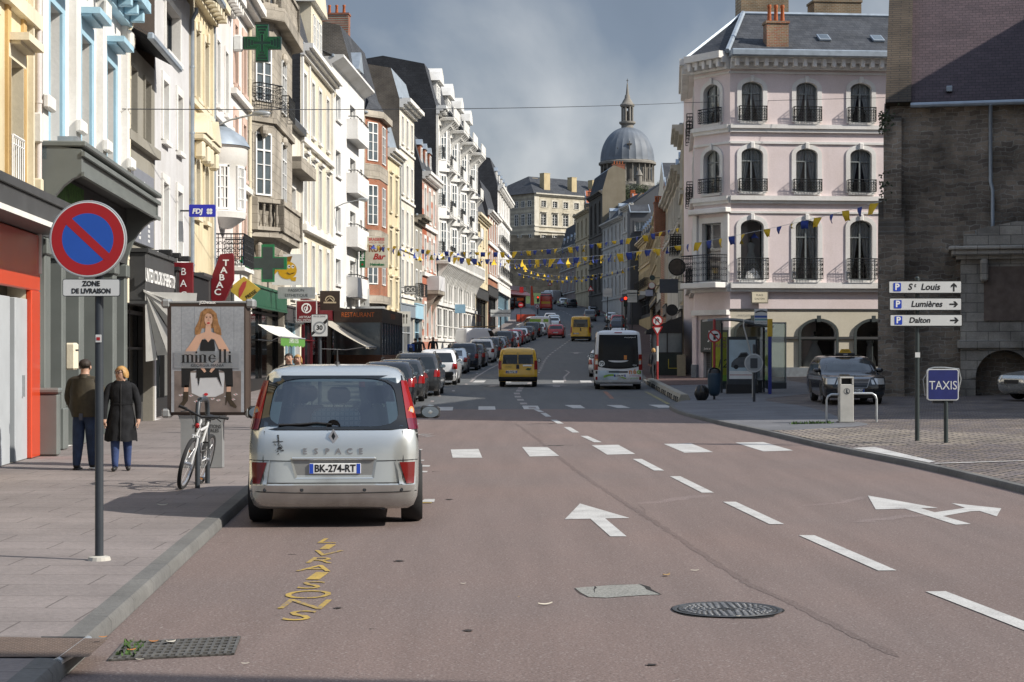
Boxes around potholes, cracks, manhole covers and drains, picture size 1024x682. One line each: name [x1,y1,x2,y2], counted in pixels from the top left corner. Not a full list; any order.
manhole cover [671,601,785,618]
drain grate [108,636,241,661]
